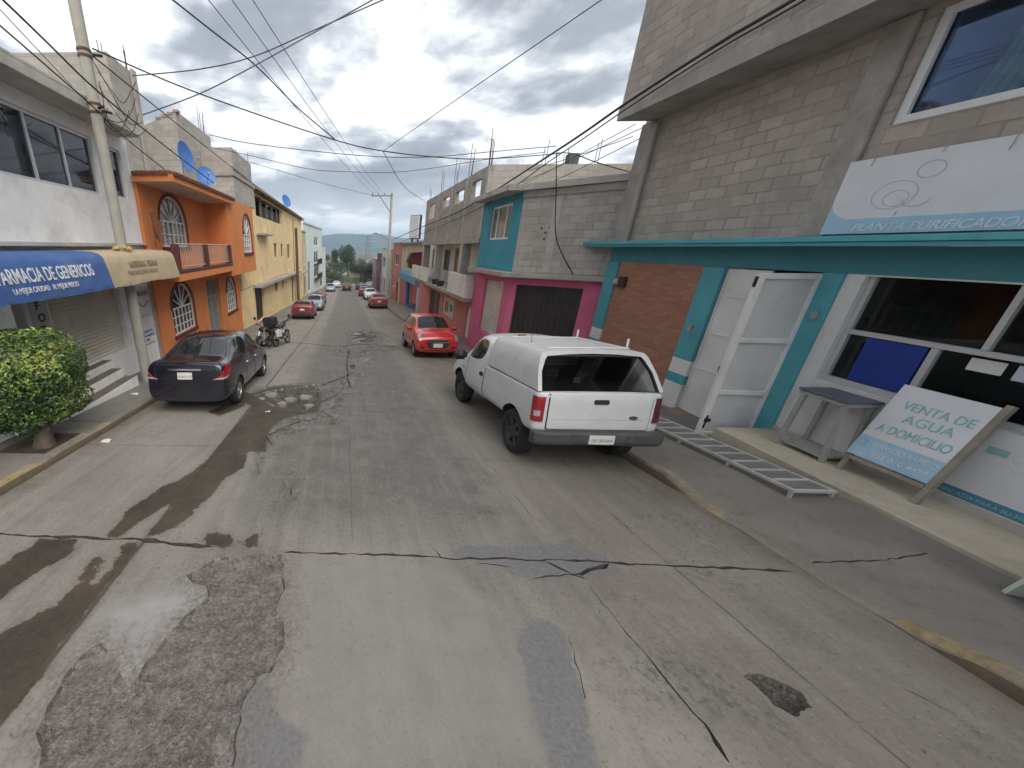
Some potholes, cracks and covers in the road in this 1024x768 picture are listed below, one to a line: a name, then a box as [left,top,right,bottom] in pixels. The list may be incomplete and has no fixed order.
pothole [743,673,812,717]
crack [0,533,790,763]
pothole [253,384,319,410]
crack [812,553,927,563]
crack [218,332,393,494]
